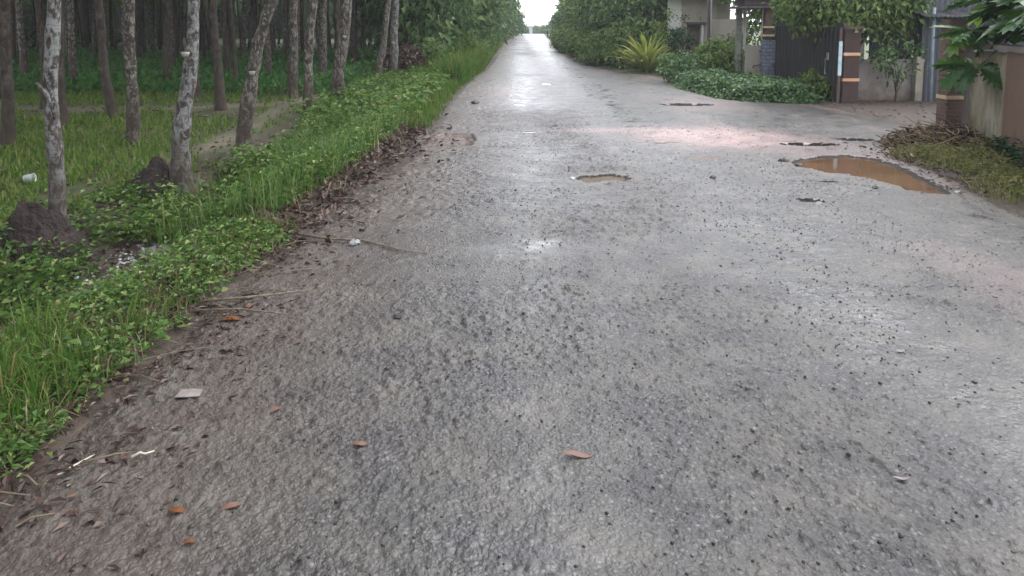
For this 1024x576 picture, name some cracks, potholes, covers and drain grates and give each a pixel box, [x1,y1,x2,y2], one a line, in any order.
pothole [417,133,476,147]
pothole [575,174,634,183]
pothole [792,155,951,195]
